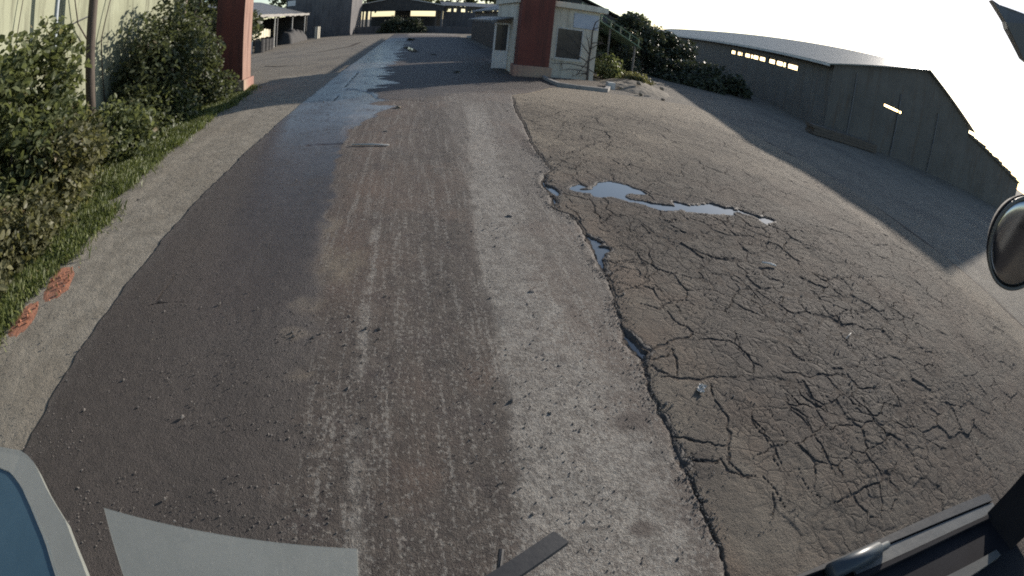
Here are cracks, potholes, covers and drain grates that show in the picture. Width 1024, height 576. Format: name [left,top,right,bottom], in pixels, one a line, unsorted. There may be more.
pothole [566,180,777,225]
crack [512,96,1024,576]
pothole [581,233,614,275]
